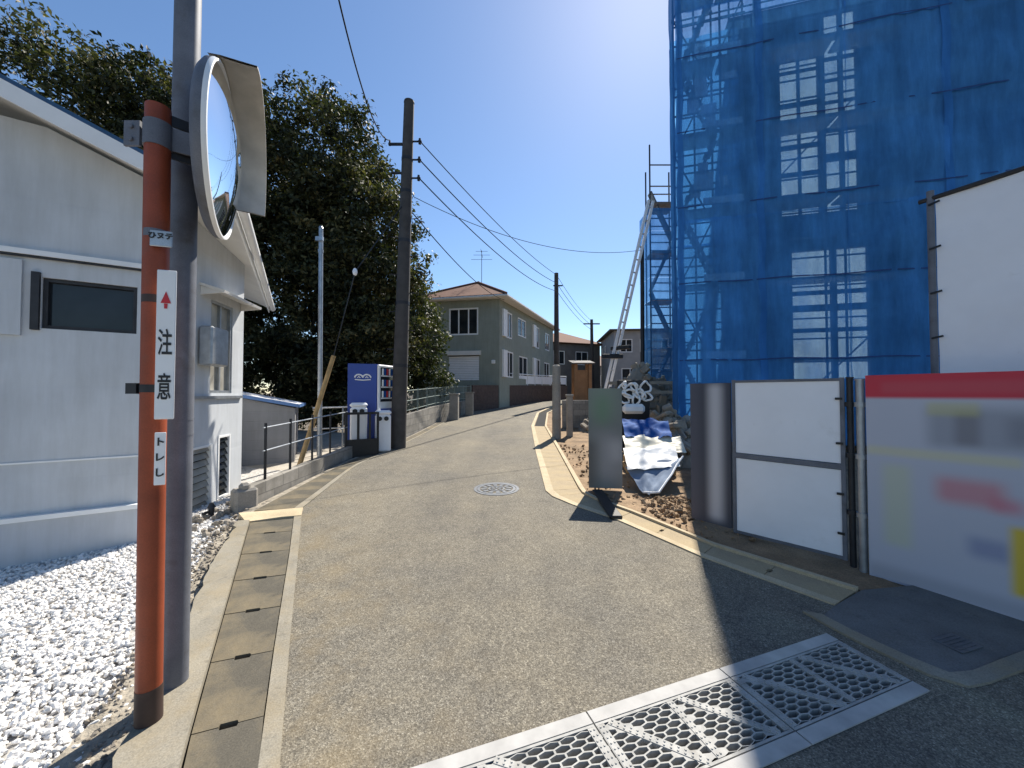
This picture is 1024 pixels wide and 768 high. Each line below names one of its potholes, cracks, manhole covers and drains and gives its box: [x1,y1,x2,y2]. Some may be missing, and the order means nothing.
drain grate [411,633,930,768]
manhole cover [474,482,519,496]
